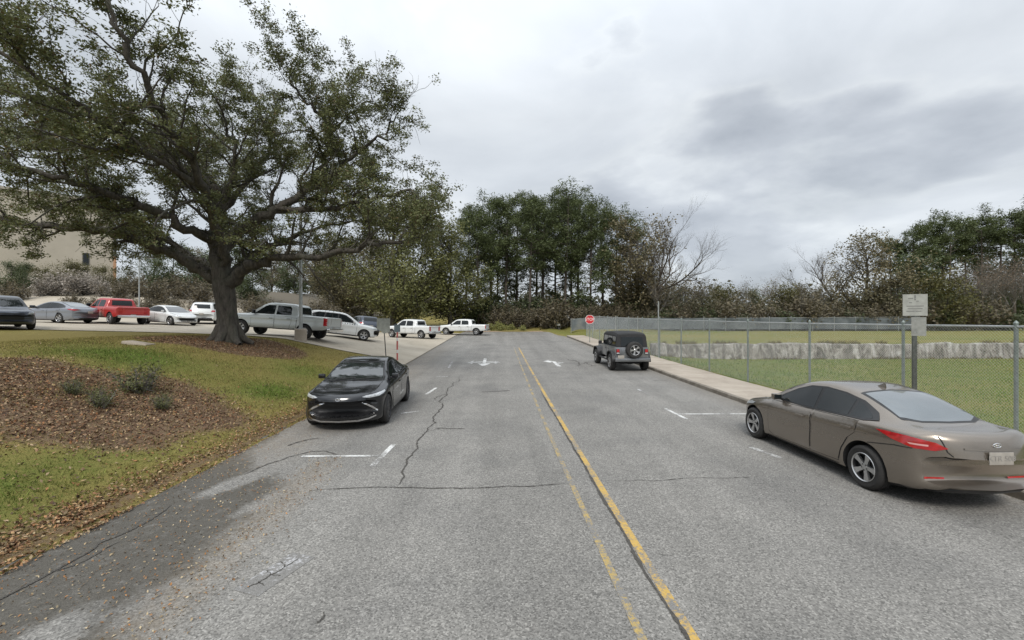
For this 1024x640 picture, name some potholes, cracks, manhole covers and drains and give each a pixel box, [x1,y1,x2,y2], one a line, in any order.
crack [245,438,335,474]
crack [0,505,171,599]
crack [316,379,565,490]
